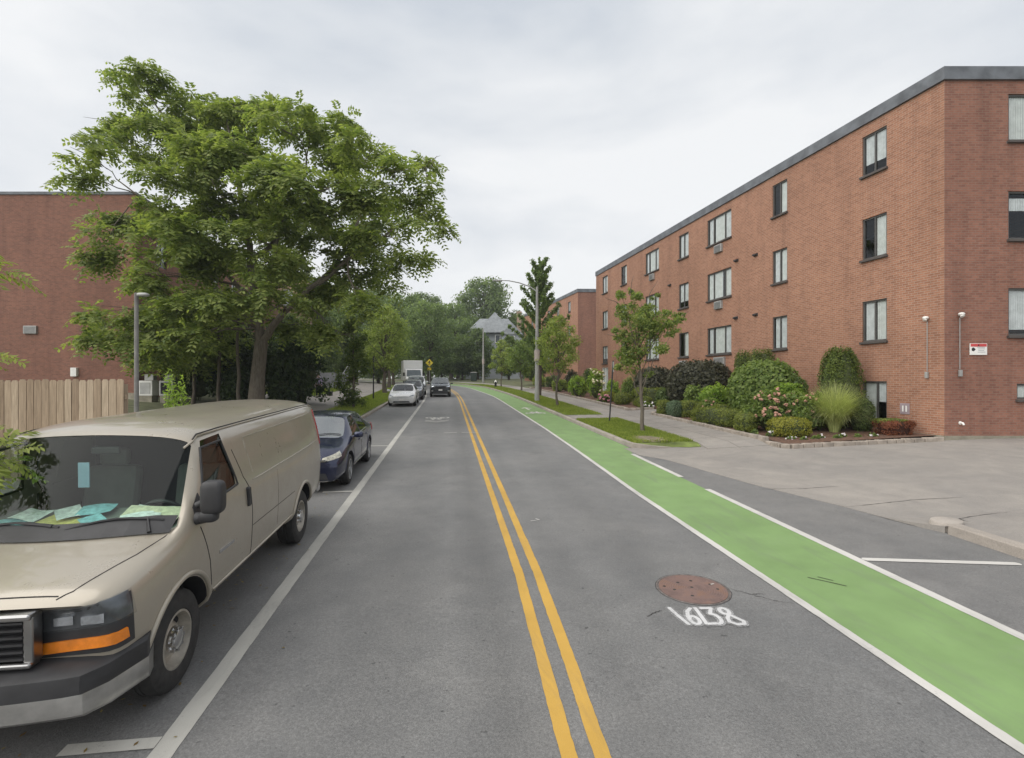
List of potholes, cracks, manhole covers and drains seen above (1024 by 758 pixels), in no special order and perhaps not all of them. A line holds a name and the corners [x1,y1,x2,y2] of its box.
manhole cover [655,574,732,606]
